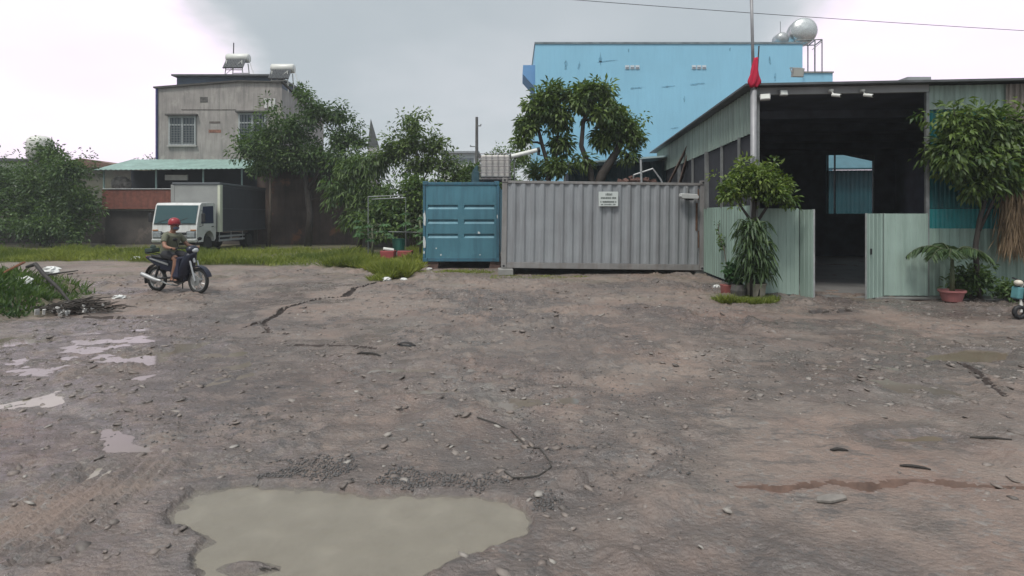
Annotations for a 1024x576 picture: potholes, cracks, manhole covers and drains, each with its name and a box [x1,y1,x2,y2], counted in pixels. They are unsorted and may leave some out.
crack [960,363,1009,397]
pothole [160,476,539,576]
crack [734,479,1024,493]
crack [243,281,383,349]
